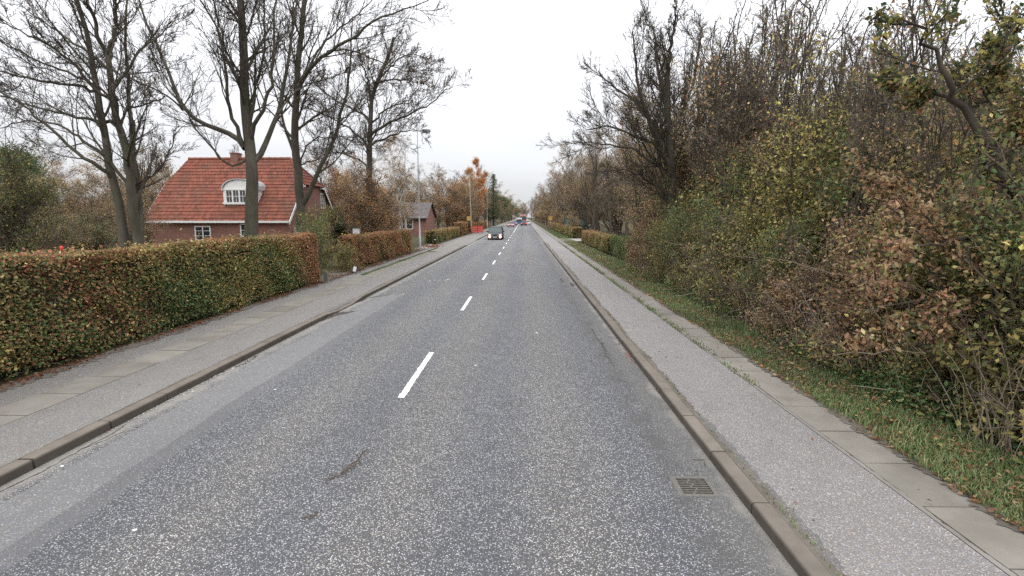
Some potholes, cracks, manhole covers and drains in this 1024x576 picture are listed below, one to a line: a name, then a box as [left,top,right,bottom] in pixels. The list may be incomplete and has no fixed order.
drain grate [669,476,720,497]
crack [321,449,368,484]
